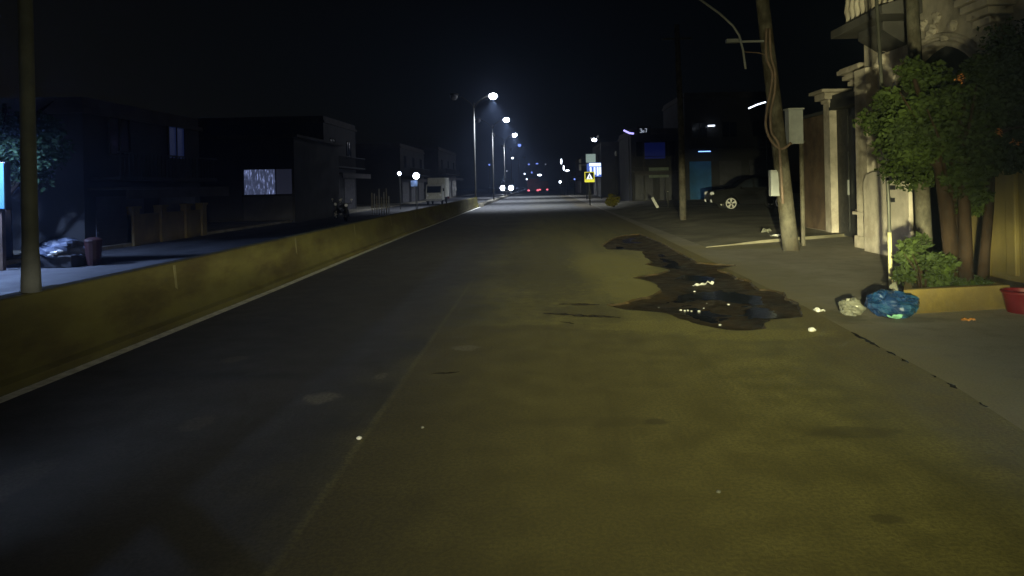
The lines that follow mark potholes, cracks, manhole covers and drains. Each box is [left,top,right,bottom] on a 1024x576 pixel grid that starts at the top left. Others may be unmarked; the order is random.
crack [851,332,988,407]
pothole [602,234,803,331]
crack [543,303,621,324]
